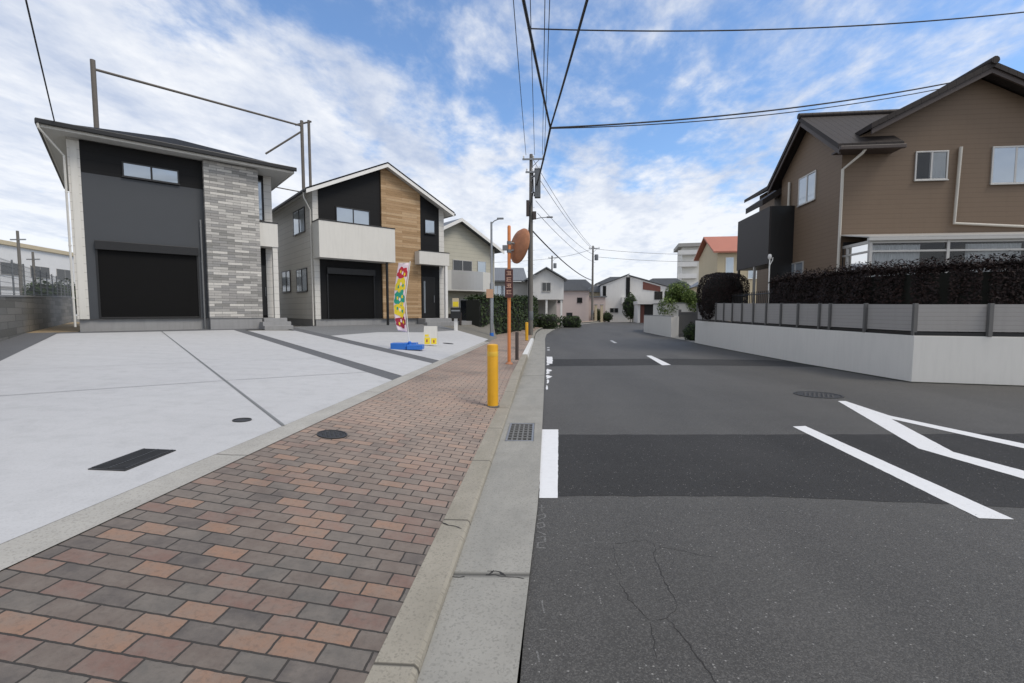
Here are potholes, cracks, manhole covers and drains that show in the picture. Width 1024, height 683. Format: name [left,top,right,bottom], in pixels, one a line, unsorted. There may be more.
drain grate [88,448,176,471]
drain grate [505,423,535,441]
manhole cover [793,391,844,399]
crack [609,541,719,683]
manhole cover [317,430,347,439]
